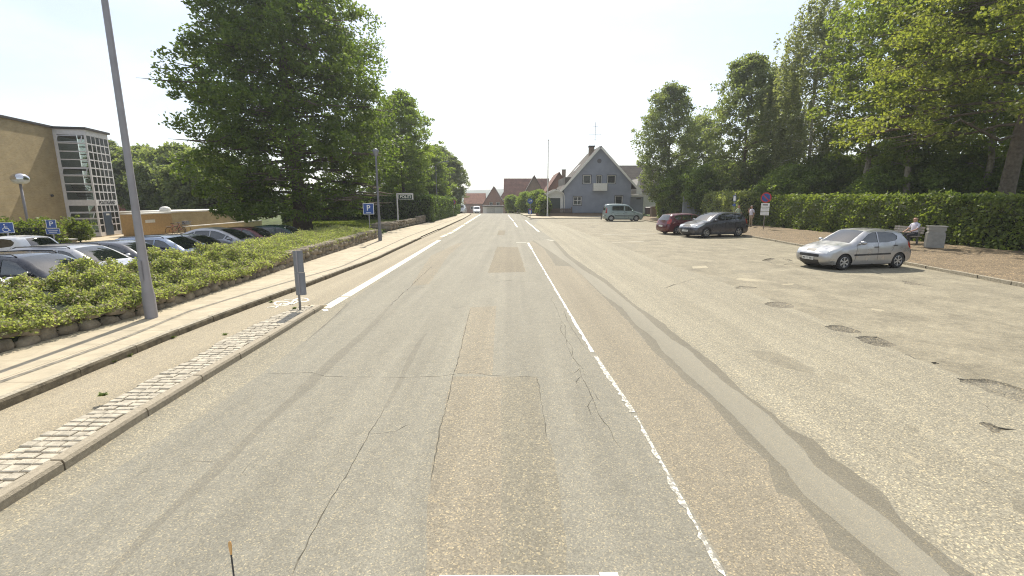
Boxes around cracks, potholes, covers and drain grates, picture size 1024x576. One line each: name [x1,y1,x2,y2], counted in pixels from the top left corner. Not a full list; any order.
pothole [979,422,1016,433]
pothole [957,378,1024,404]
crack [551,298,621,448]
crack [303,313,547,477]
pothole [824,325,861,333]
crack [292,411,405,575]
pothole [855,336,896,347]
